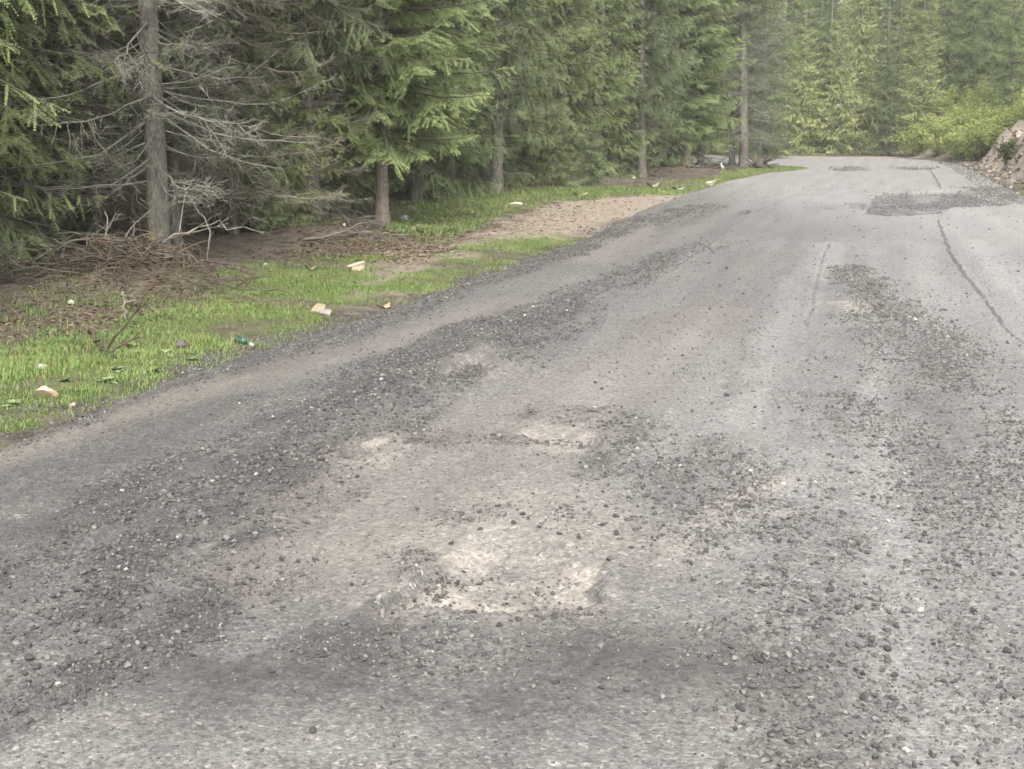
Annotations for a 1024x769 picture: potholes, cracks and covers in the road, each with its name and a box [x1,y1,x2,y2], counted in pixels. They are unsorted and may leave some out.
crack [936,218,1024,345]
crack [803,240,831,329]
pothole [512,425,606,449]
pothole [427,345,507,393]
pothole [358,528,609,615]
pothole [339,432,397,461]
